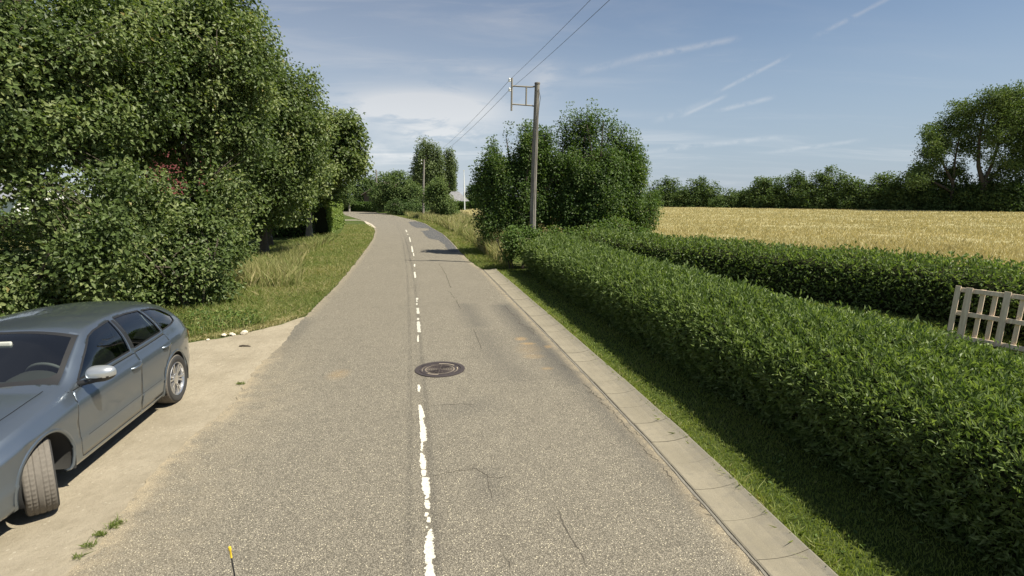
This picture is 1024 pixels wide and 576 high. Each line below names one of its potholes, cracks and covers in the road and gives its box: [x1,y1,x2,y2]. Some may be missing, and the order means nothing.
manhole cover [415,361,465,378]
